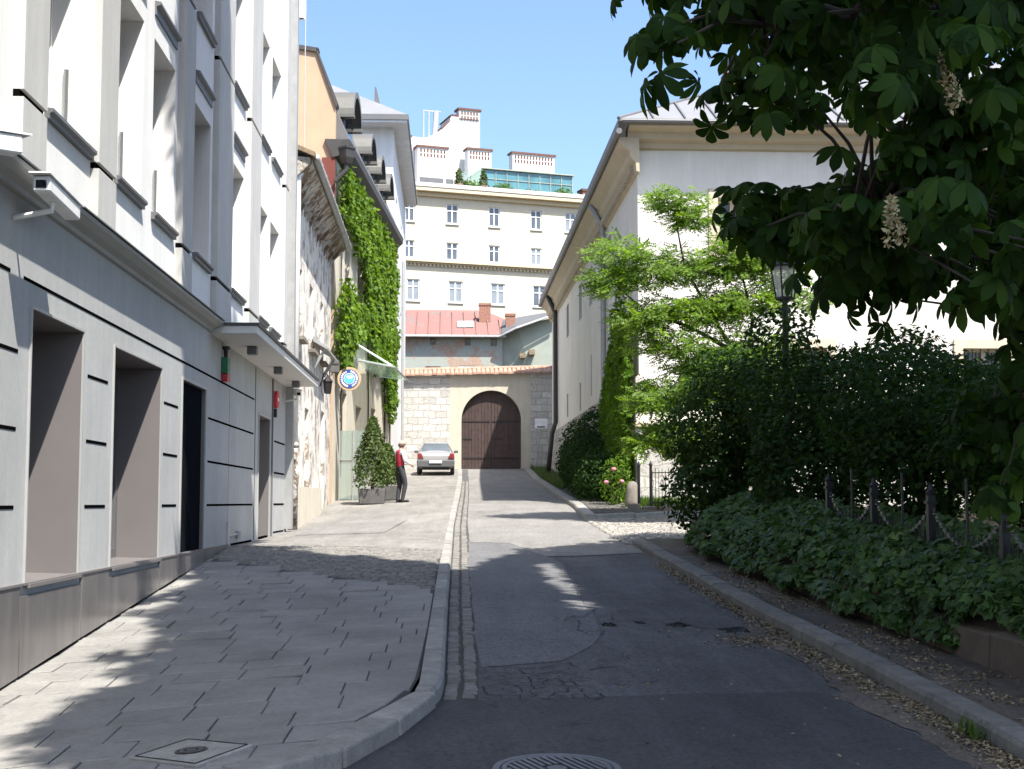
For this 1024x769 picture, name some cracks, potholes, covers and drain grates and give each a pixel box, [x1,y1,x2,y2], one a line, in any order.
crack [564,598,714,636]
manhole cover [492,753,622,769]
utility cover [129,738,253,769]
crack [482,661,659,699]
